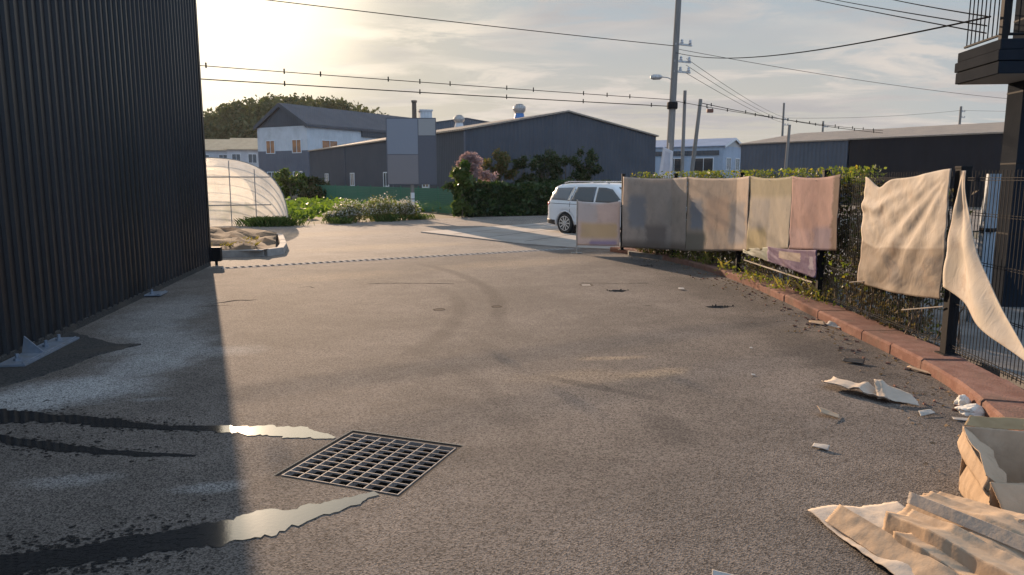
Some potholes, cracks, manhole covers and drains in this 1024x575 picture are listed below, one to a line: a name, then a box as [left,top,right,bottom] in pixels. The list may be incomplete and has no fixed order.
drain grate [274,430,463,498]
